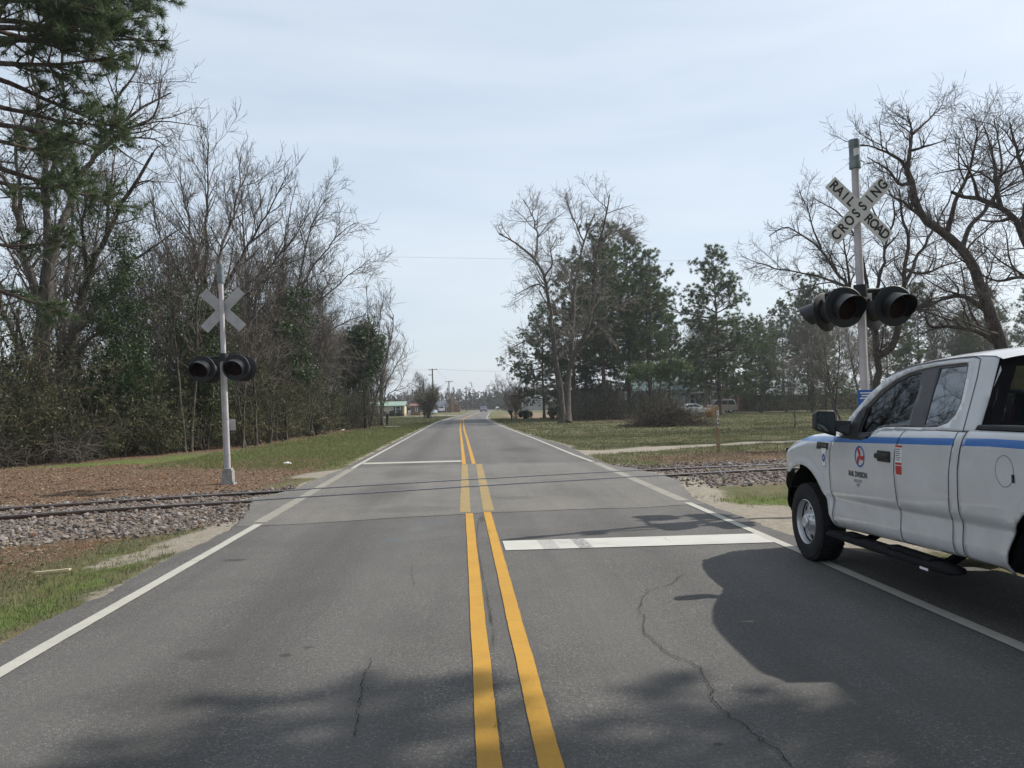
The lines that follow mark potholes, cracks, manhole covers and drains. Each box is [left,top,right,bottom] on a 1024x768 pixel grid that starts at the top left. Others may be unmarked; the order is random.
crack [639,573,792,767]
crack [354,658,372,736]
